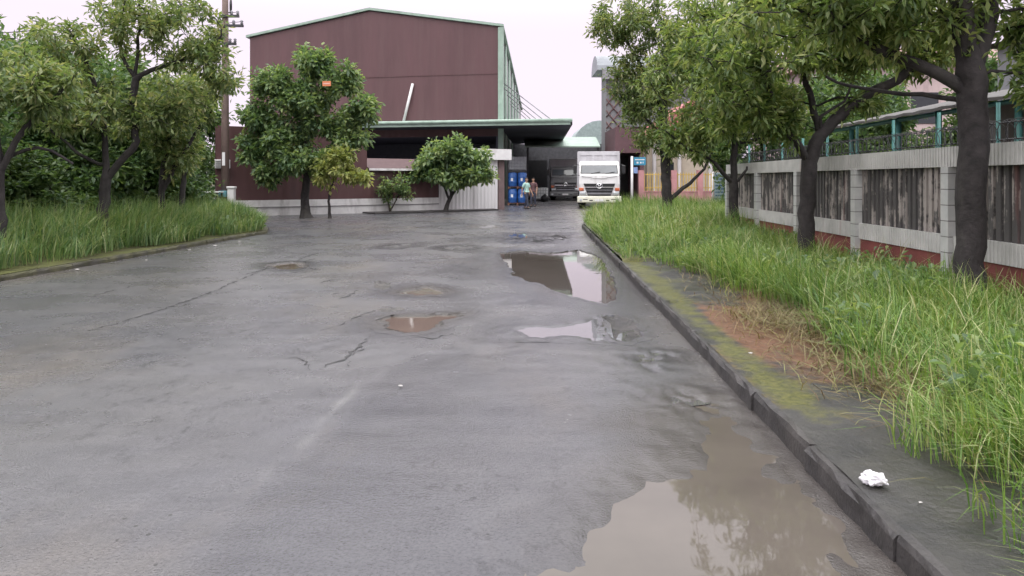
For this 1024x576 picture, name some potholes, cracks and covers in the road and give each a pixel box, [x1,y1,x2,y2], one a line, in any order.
pothole [385,284,458,297]
pothole [497,249,623,306]
crack [290,227,574,370]
pothole [257,261,315,271]
crack [87,267,266,331]
pothole [359,310,480,336]
